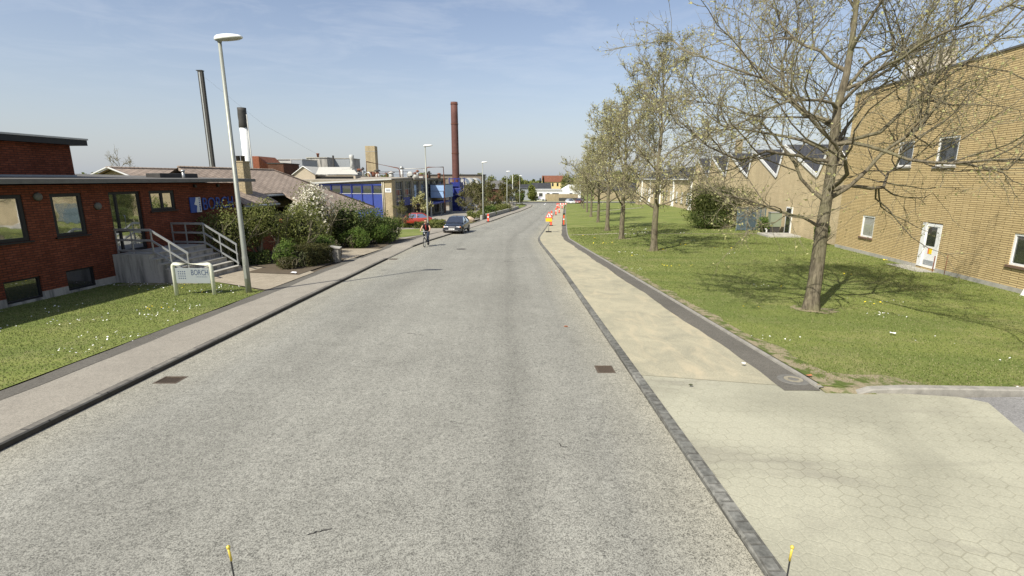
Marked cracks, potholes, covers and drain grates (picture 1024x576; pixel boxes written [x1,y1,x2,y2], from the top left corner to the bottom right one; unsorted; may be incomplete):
manhole cover [777,374,810,385]
drain grate [152,376,188,384]
drain grate [594,365,616,373]
